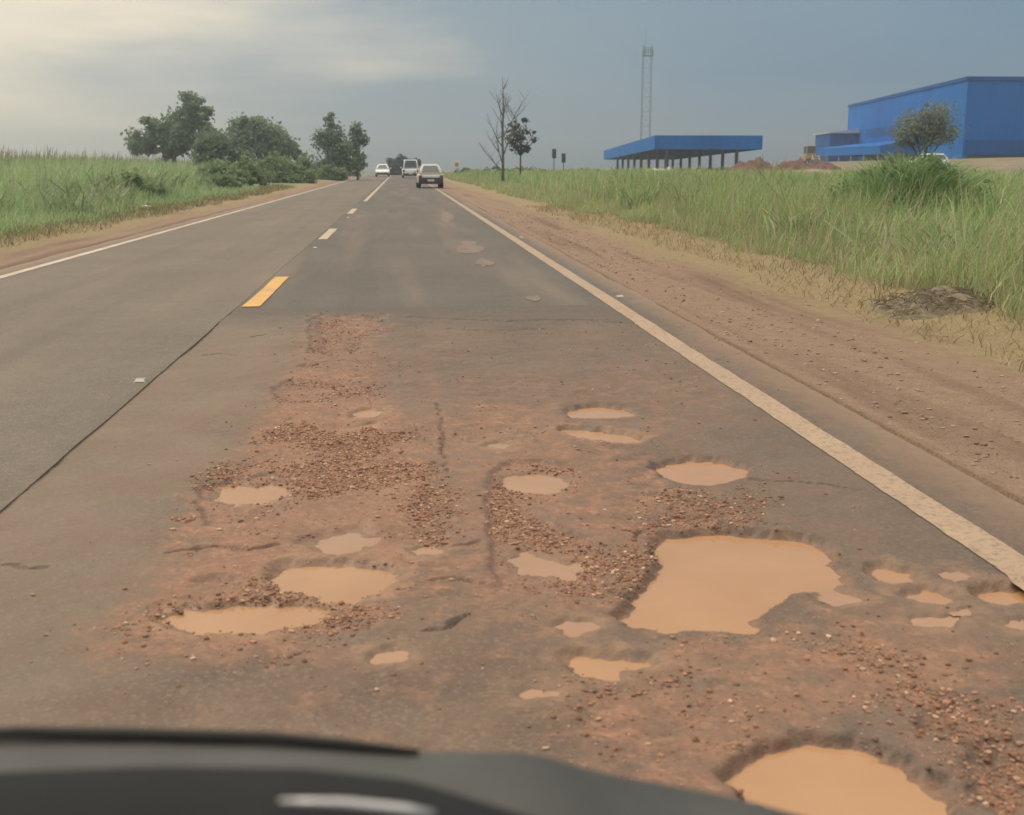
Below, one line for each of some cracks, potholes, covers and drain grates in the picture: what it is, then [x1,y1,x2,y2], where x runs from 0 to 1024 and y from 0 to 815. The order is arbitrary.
pothole [700,723,984,815]
pothole [557,400,651,419]
pothole [541,610,619,643]
pothole [925,561,993,584]
pothole [146,592,346,637]
pothole [932,601,992,619]
pothole [961,574,1024,607]
pothole [259,553,419,605]
pothole [361,638,427,668]
pothole [801,585,885,609]
pothole [188,470,310,527]
